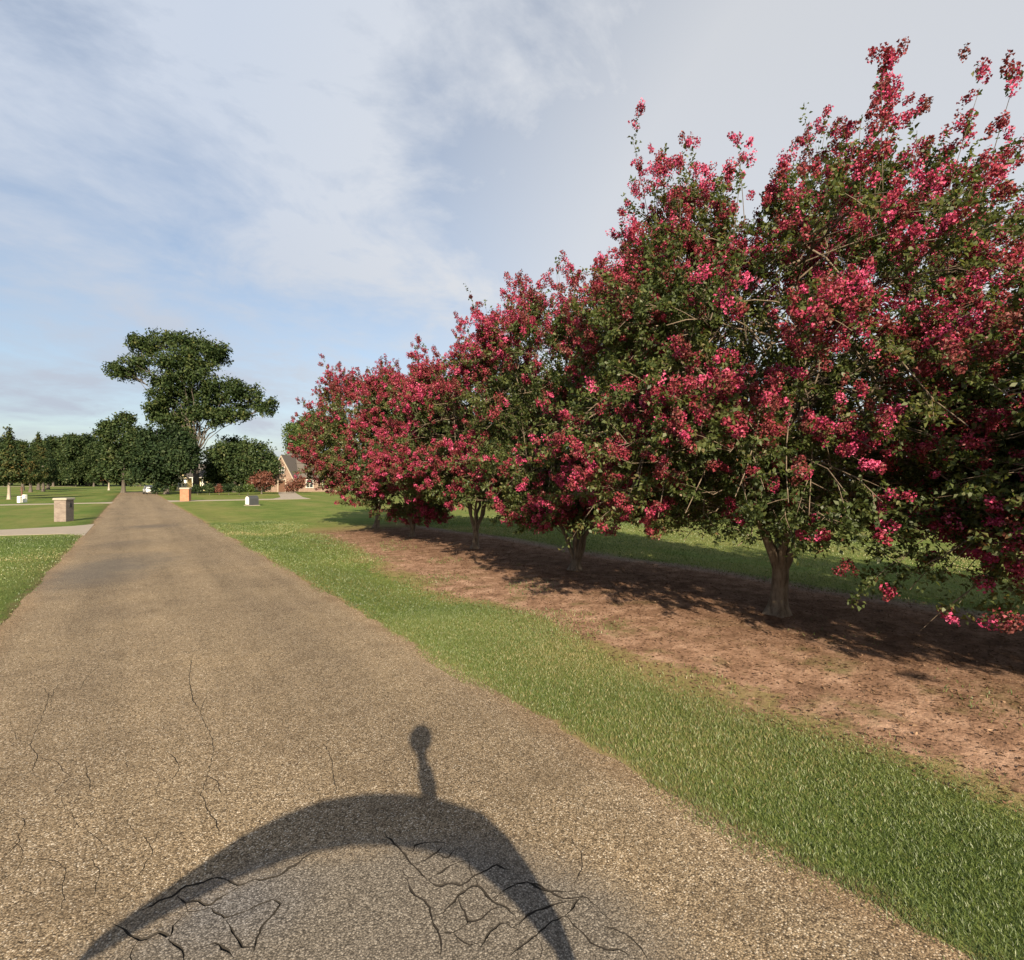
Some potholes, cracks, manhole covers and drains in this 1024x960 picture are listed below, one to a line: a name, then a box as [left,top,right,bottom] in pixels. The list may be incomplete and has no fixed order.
crack [384,832,648,959]
crack [189,660,221,836]
crack [2,685,198,909]
crack [114,833,312,960]
